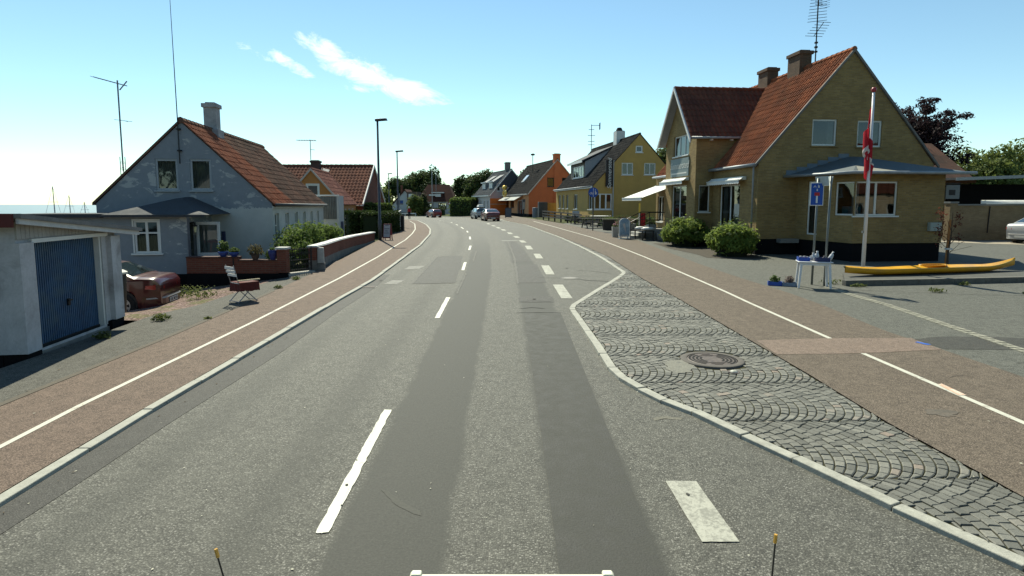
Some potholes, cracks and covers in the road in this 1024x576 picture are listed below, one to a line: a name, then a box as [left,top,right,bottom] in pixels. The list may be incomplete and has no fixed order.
manhole cover [680,352,745,369]
